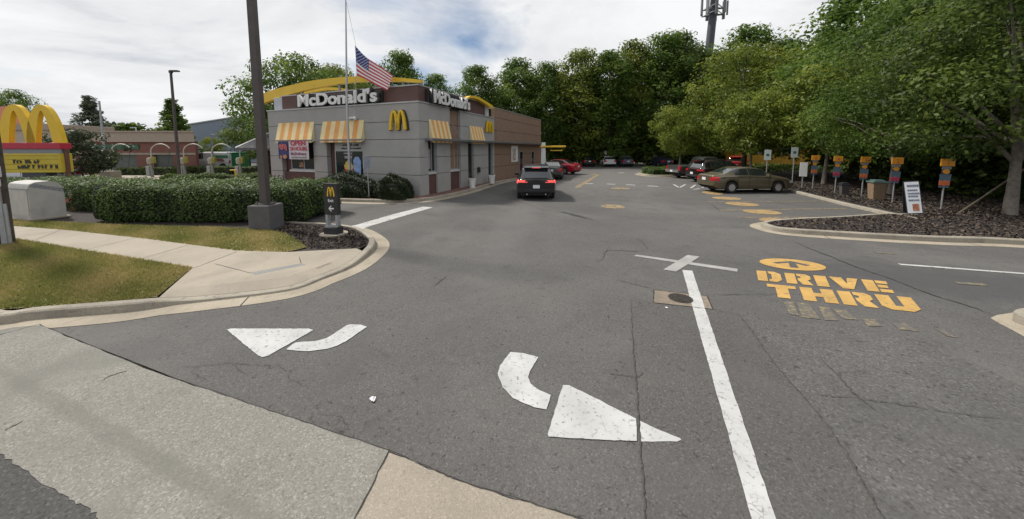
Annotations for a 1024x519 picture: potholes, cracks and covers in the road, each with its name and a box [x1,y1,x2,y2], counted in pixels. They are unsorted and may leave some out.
crack [170,362,304,386]
crack [807,364,1015,419]
manhole cover [653,289,713,309]
